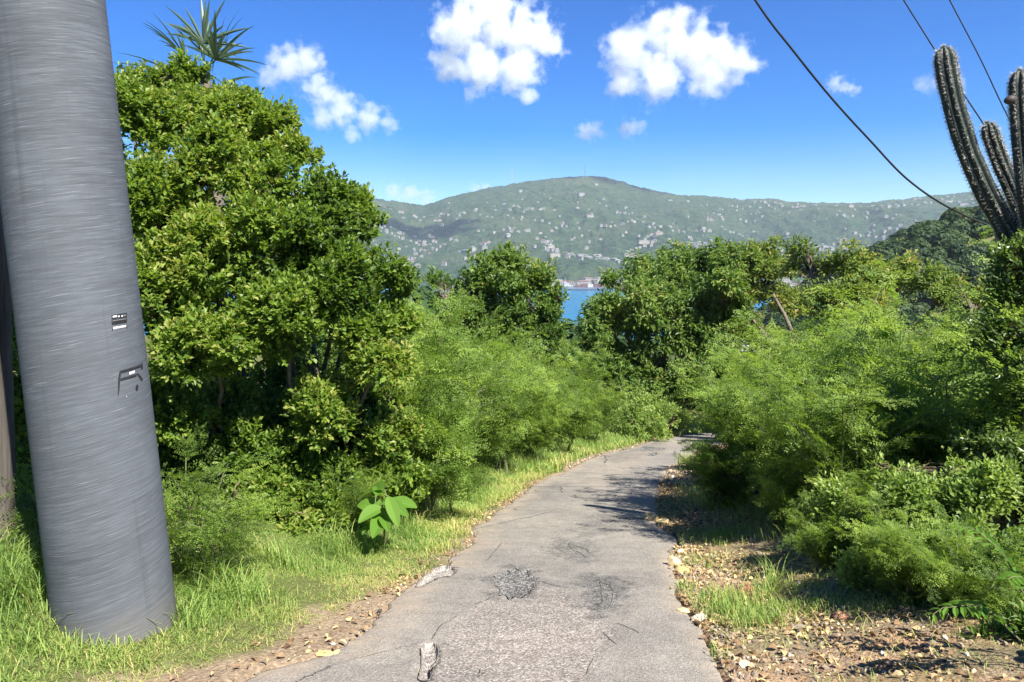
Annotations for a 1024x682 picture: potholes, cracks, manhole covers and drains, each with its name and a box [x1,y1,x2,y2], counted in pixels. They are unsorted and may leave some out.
pothole [415,565,456,587]
crack [554,527,589,557]
crack [473,508,551,561]
pothole [494,567,536,600]
pothole [418,642,440,682]
